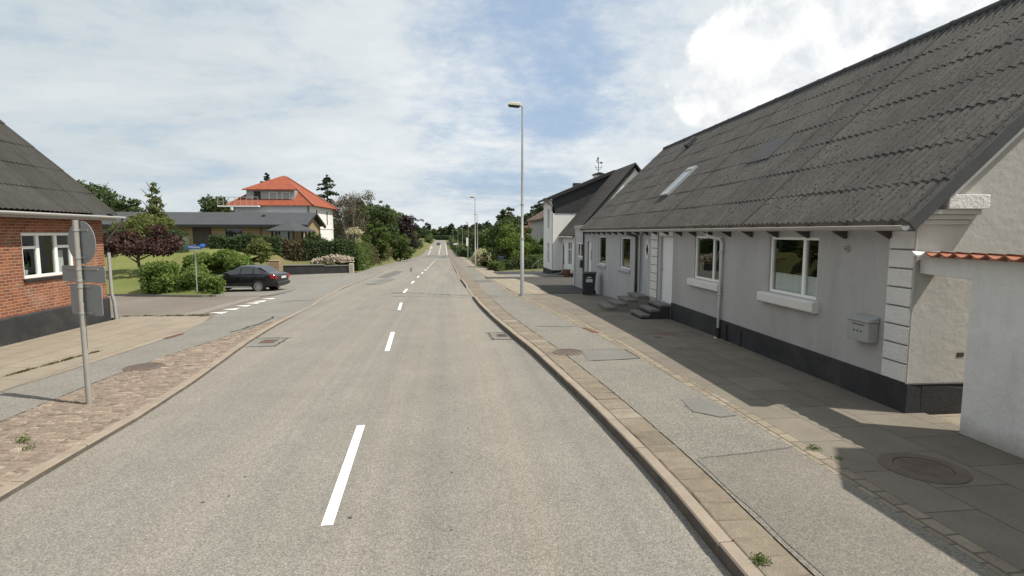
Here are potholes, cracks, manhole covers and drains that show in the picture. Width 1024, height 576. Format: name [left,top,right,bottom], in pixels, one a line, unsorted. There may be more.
manhole cover [878,452,972,485]
manhole cover [122,362,165,372]
